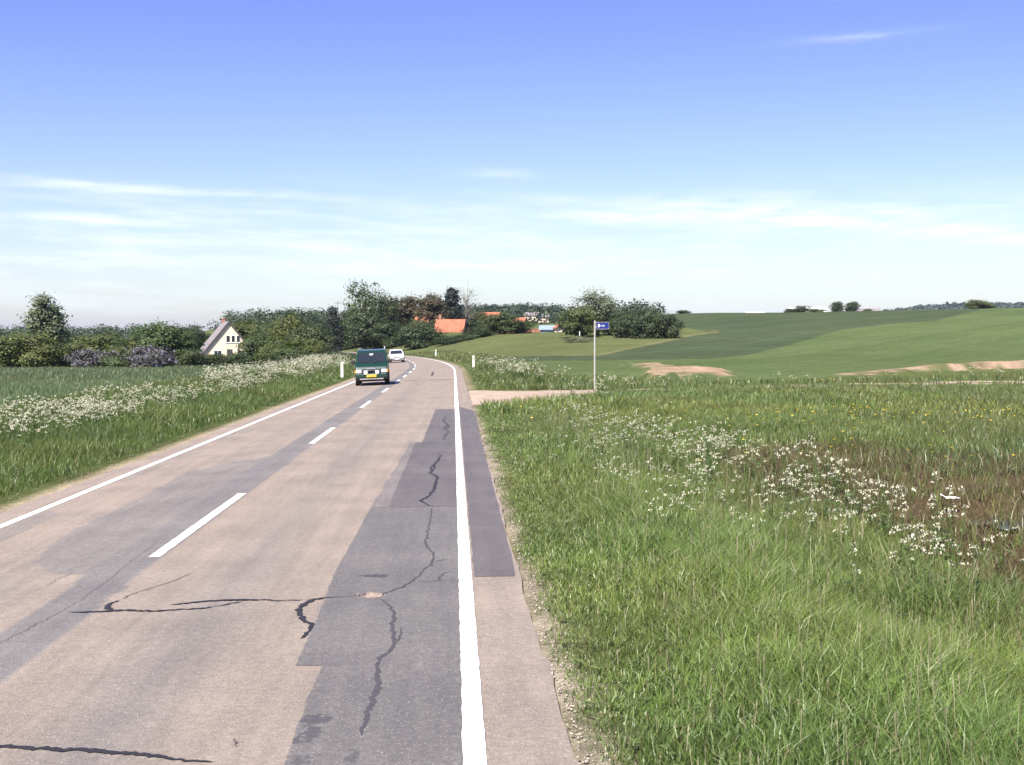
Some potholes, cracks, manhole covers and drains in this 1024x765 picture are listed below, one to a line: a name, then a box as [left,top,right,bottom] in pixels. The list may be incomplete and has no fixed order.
crack [294,416,449,735]
